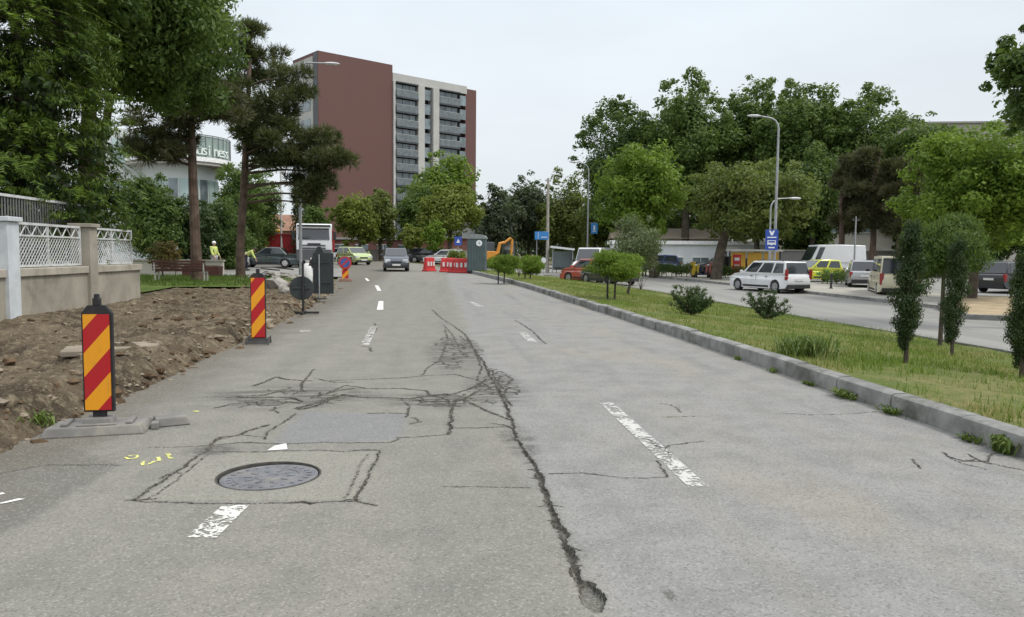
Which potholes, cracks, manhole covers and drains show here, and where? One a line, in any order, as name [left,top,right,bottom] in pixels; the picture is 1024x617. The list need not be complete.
manhole cover [215,461,322,491]
crack [124,310,702,590]
crack [942,452,1021,470]
